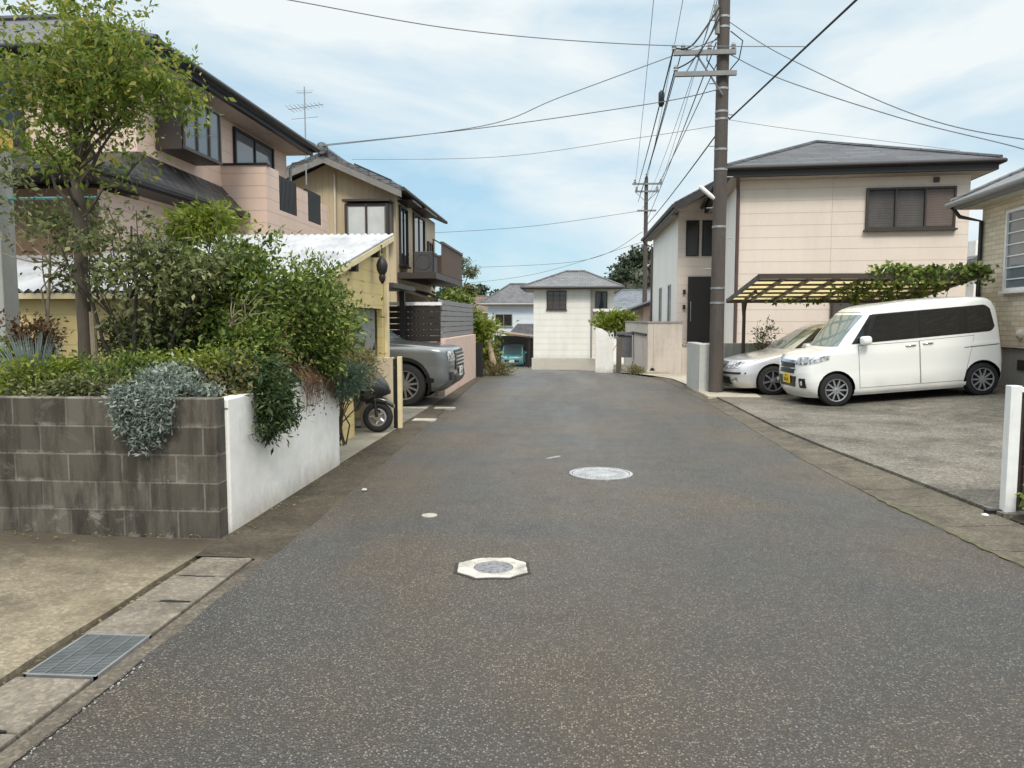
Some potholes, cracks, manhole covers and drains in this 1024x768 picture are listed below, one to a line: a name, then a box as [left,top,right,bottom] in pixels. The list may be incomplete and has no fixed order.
manhole cover [569,467,633,480]
drain grate [23,633,151,683]
manhole cover [454,557,531,580]
